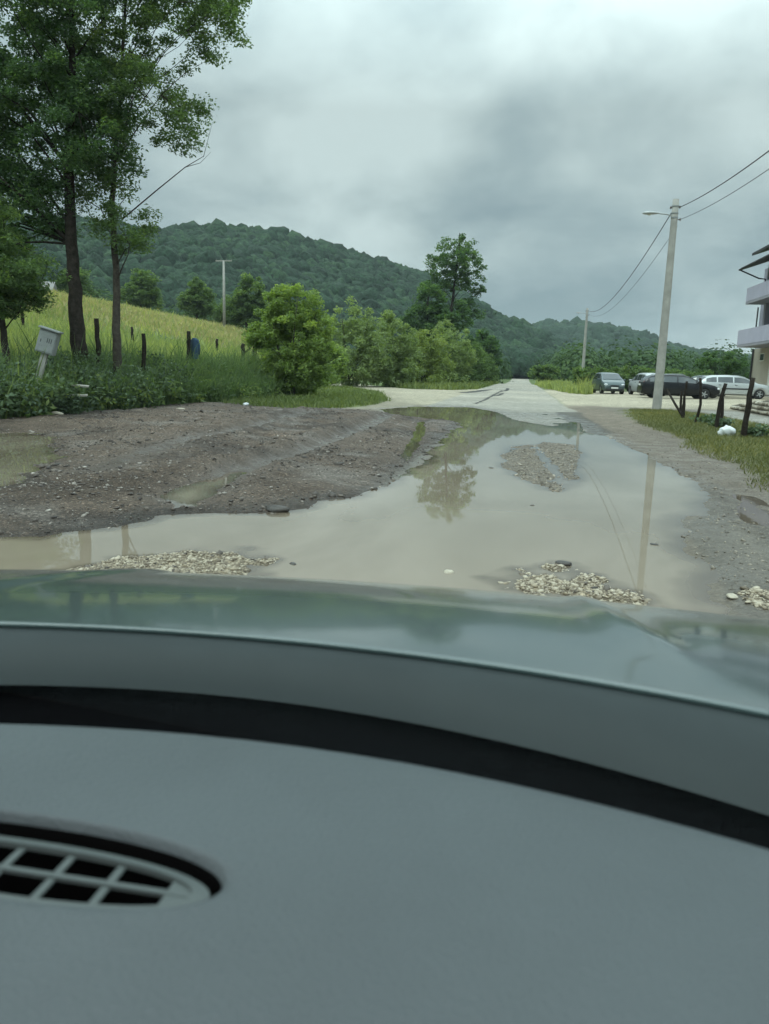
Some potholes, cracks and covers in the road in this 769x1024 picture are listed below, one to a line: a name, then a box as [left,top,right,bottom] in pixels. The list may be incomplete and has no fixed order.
crack [457,388,510,404]
pothole [37,406,738,616]
